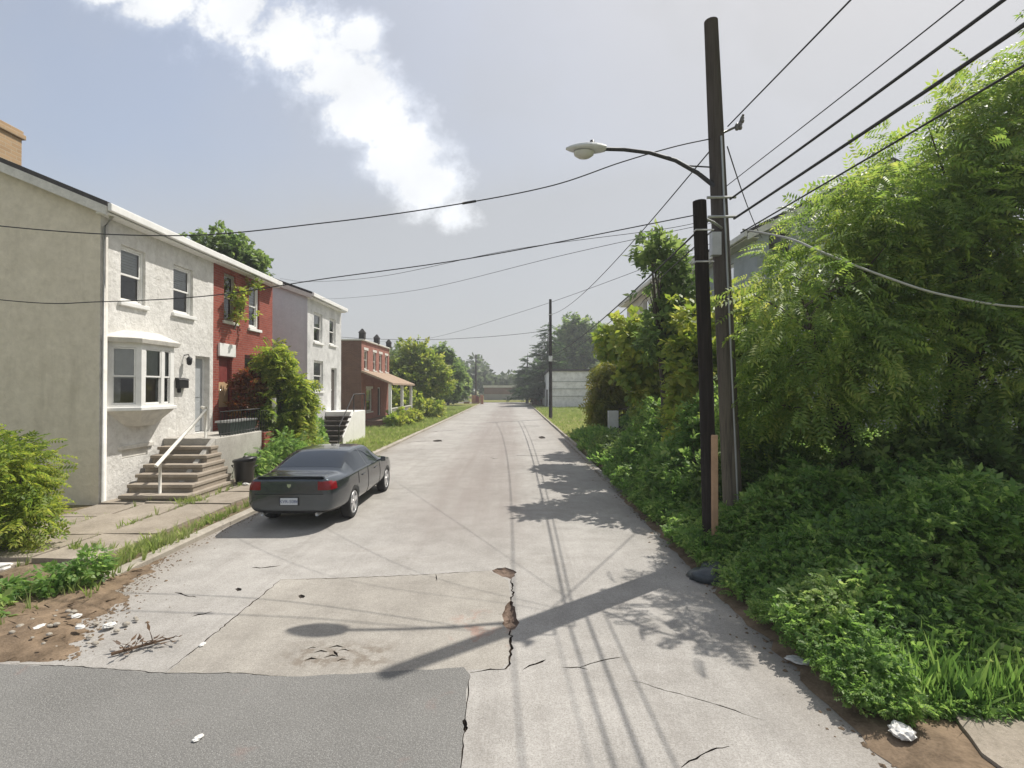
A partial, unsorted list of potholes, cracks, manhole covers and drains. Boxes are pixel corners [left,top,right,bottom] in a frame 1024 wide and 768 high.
crack [49,572,458,676]
crack [681,746,729,768]
